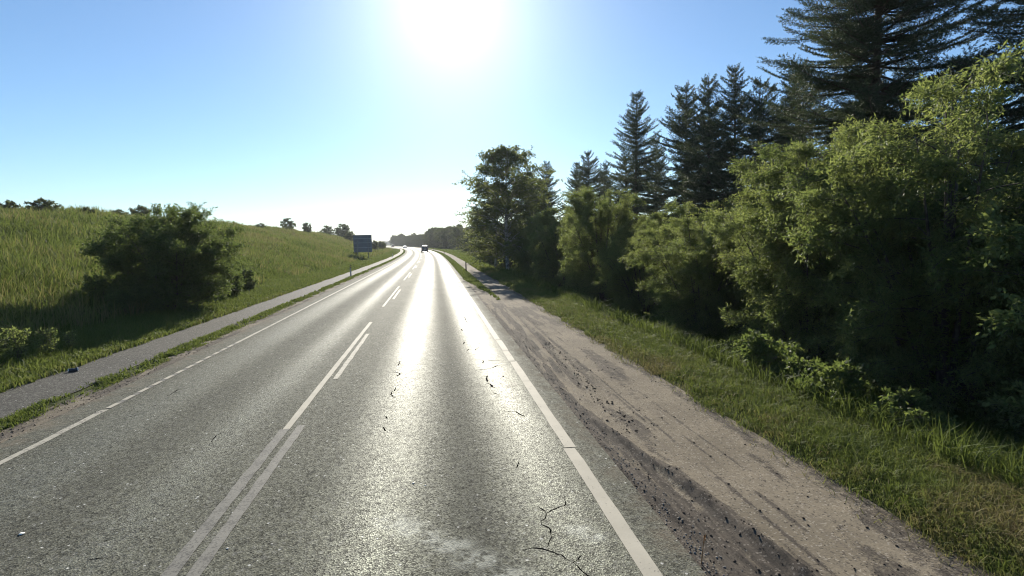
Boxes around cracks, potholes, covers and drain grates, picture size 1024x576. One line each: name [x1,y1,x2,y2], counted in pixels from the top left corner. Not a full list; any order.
crack [522,501,589,576]
crack [461,311,504,394]
